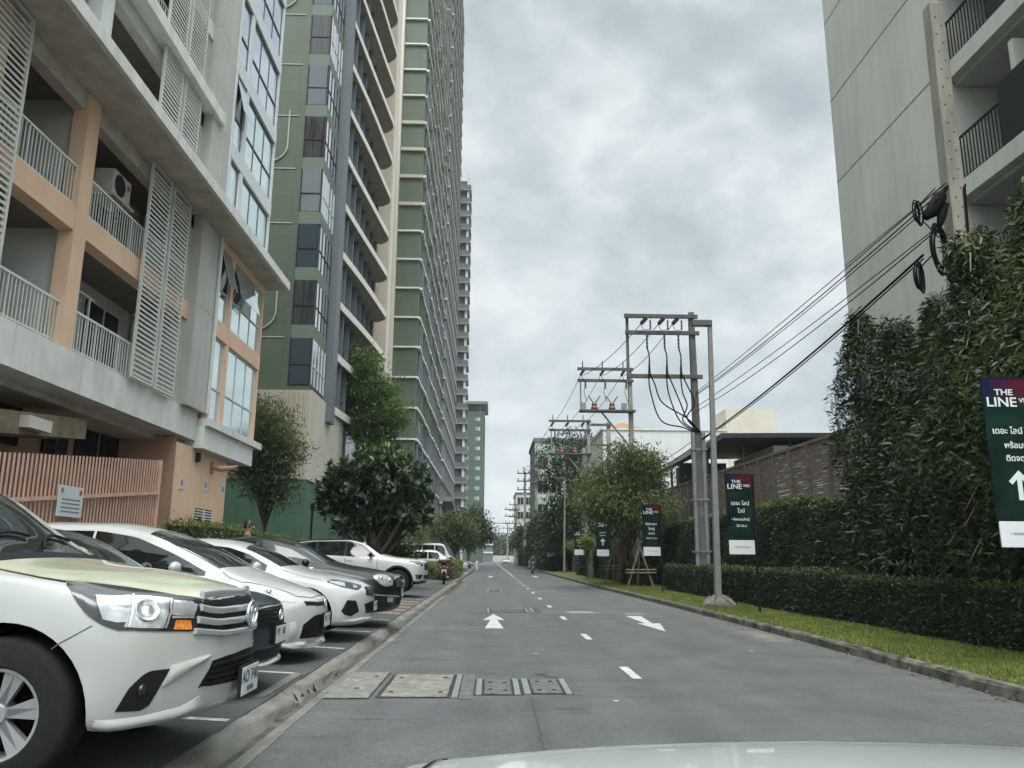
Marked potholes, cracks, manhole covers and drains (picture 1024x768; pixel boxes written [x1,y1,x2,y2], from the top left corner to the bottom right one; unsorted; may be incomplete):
manhole cover [520,678,574,695]
manhole cover [323,672,391,699]
crack [530,697,546,750]
manhole cover [375,674,464,699]
manhole cover [473,678,524,696]
